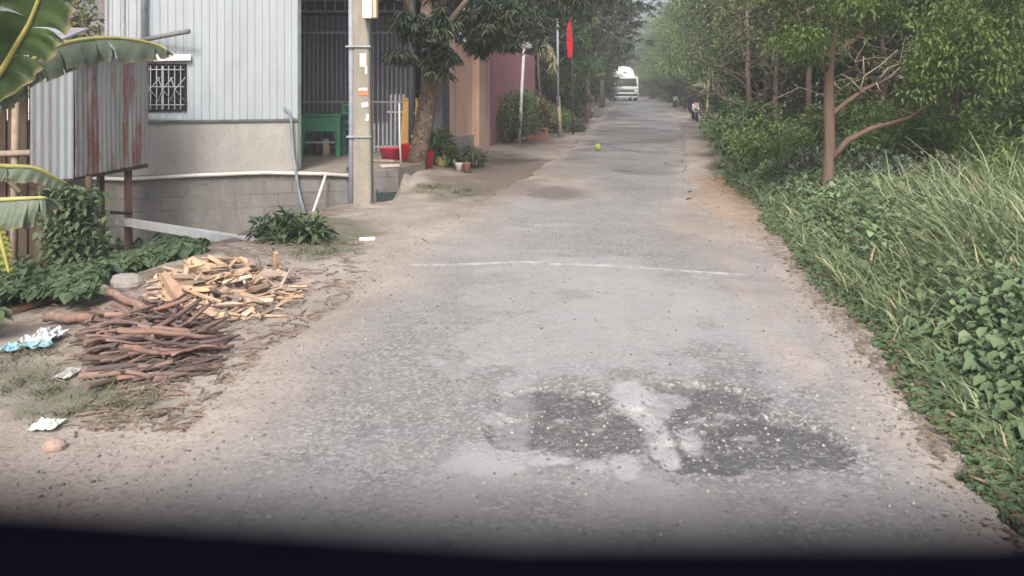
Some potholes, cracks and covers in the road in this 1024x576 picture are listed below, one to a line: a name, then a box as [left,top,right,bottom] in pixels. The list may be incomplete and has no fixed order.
pothole [637,380,859,476]
pothole [482,386,668,459]
